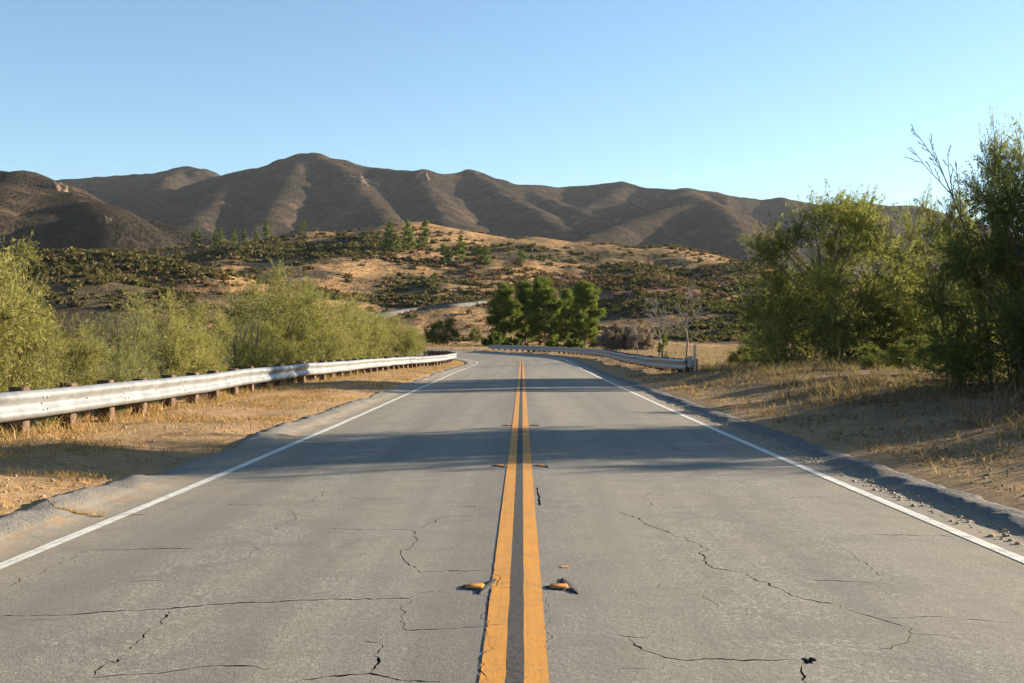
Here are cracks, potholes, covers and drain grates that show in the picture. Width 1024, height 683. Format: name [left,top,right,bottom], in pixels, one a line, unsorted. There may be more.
crack [6,506,501,678]
crack [619,635,806,683]
crack [618,493,1008,651]
